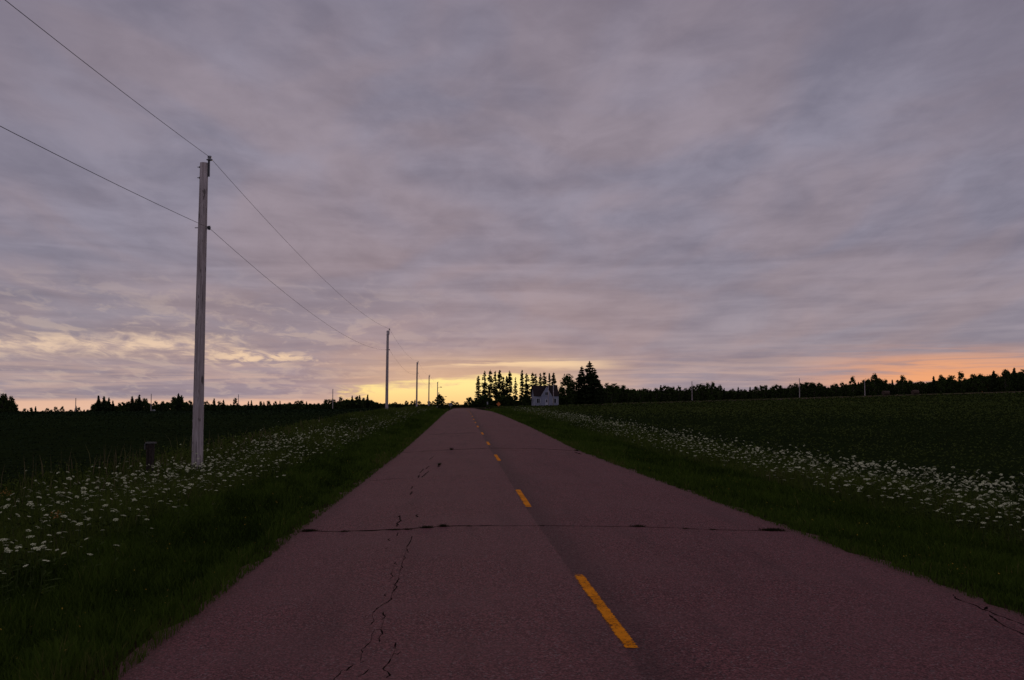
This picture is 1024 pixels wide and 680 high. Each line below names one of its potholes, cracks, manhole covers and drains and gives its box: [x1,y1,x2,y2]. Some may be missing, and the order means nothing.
crack [953,594,1024,635]
crack [309,433,762,680]
